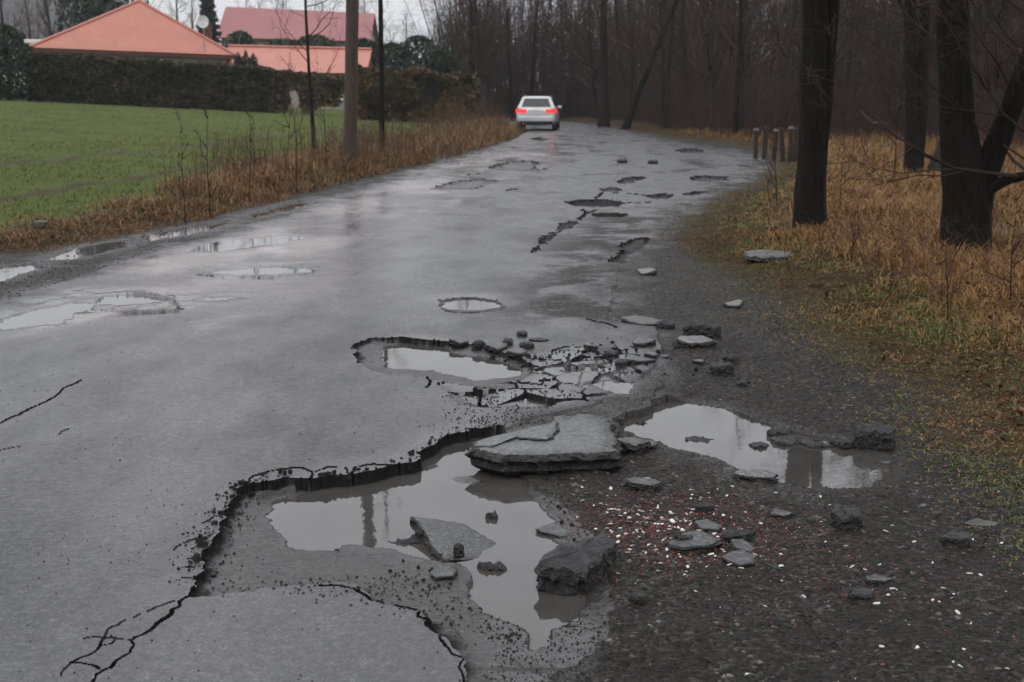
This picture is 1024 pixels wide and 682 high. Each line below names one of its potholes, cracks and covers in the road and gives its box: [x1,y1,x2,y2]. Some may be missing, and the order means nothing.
crack [0,379,82,424]
pothole [608,237,651,264]
crack [60,514,222,682]
pothole [187,424,617,682]
pothole [92,291,181,314]
pothole [431,178,498,190]
pothole [194,264,334,279]
pothole [488,161,540,171]
pothole [350,336,536,390]
pothole [564,199,626,207]
pothole [531,218,582,253]
pothole [437,297,507,314]
